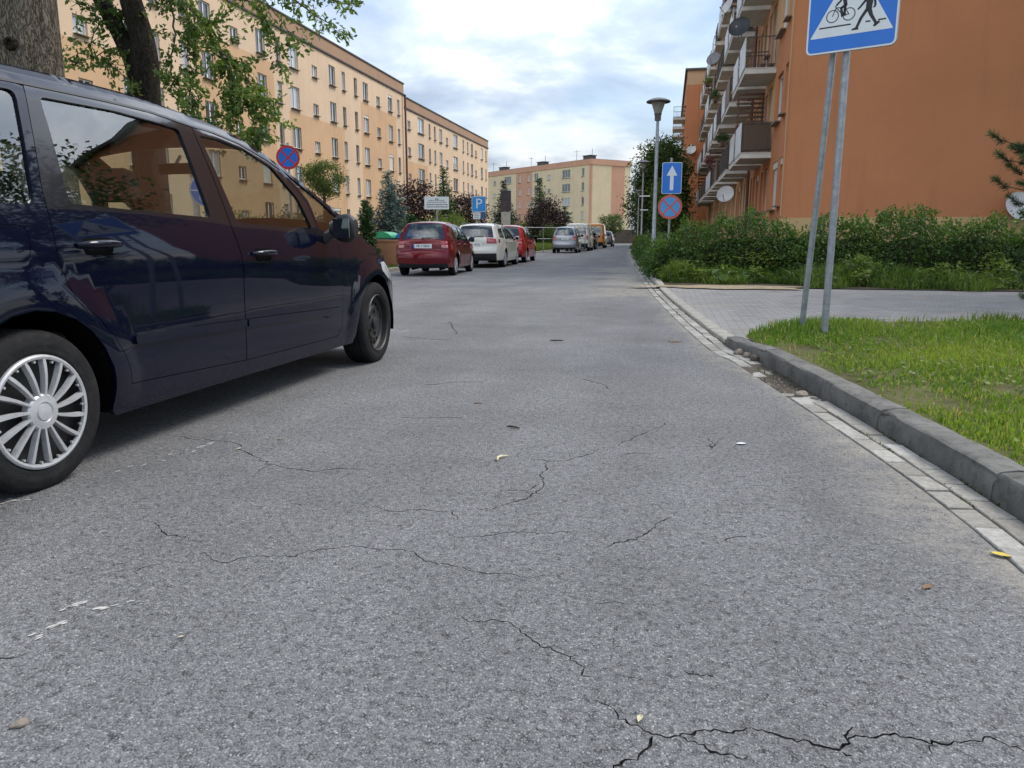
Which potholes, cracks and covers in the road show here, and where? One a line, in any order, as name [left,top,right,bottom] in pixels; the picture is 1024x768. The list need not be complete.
crack [609,518,668,547]
crack [599,702,1024,768]
crack [154,523,545,578]
crack [462,617,591,677]
crack [170,435,361,472]
crack [480,449,598,510]
